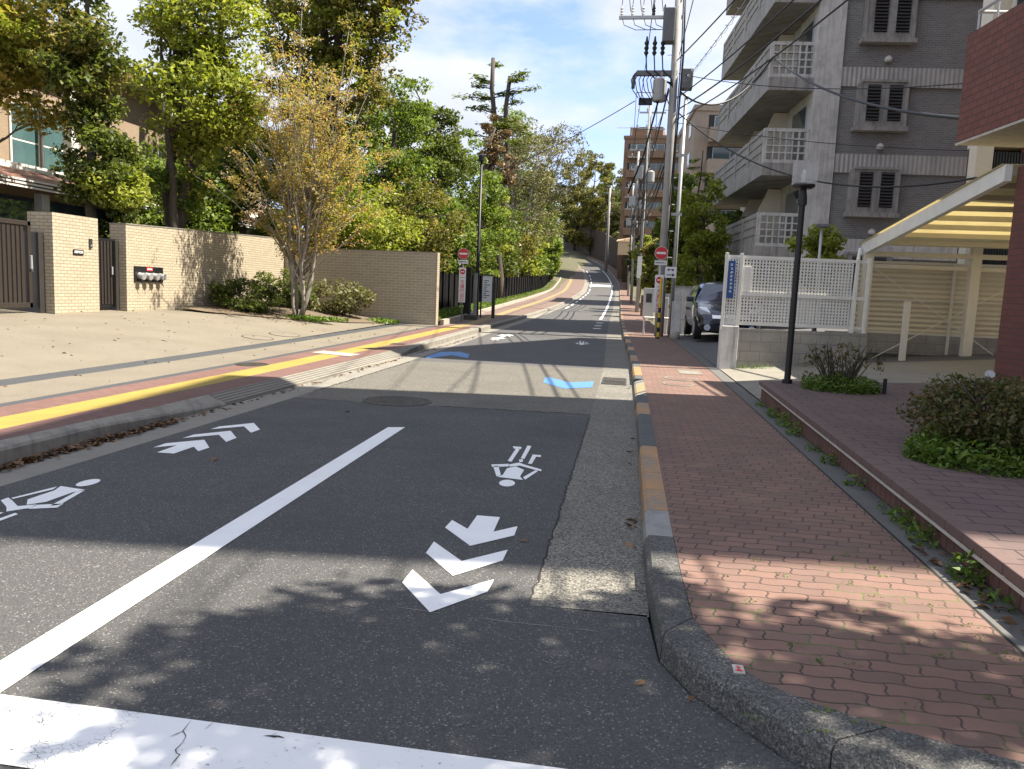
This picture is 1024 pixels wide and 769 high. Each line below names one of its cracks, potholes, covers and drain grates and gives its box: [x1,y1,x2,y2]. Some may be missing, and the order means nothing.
manhole cover [362,396,432,406]
drain grate [601,377,627,385]
